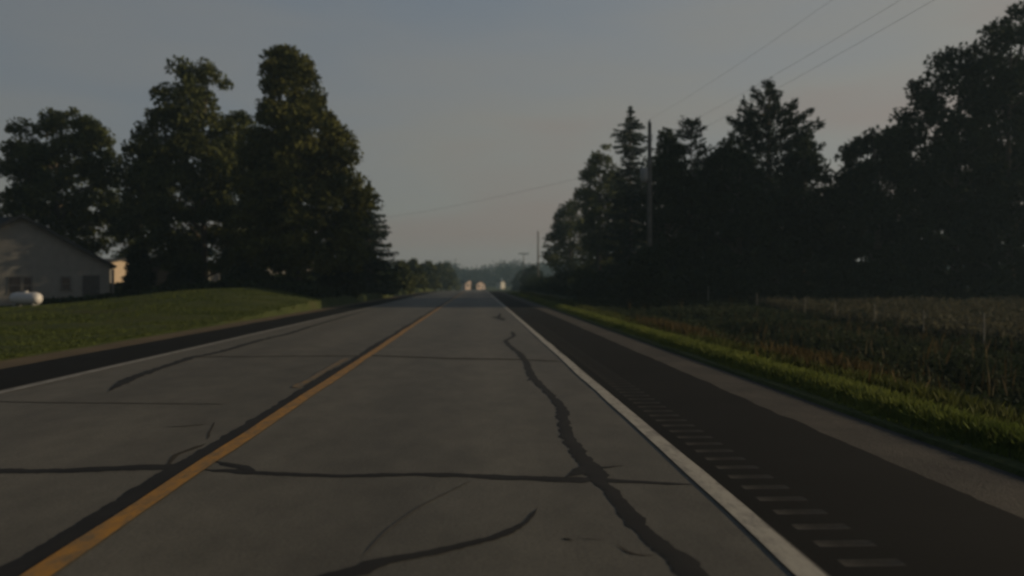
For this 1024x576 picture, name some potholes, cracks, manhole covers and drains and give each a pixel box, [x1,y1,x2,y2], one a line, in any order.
crack [363,480,471,556]
crack [561,537,655,555]
